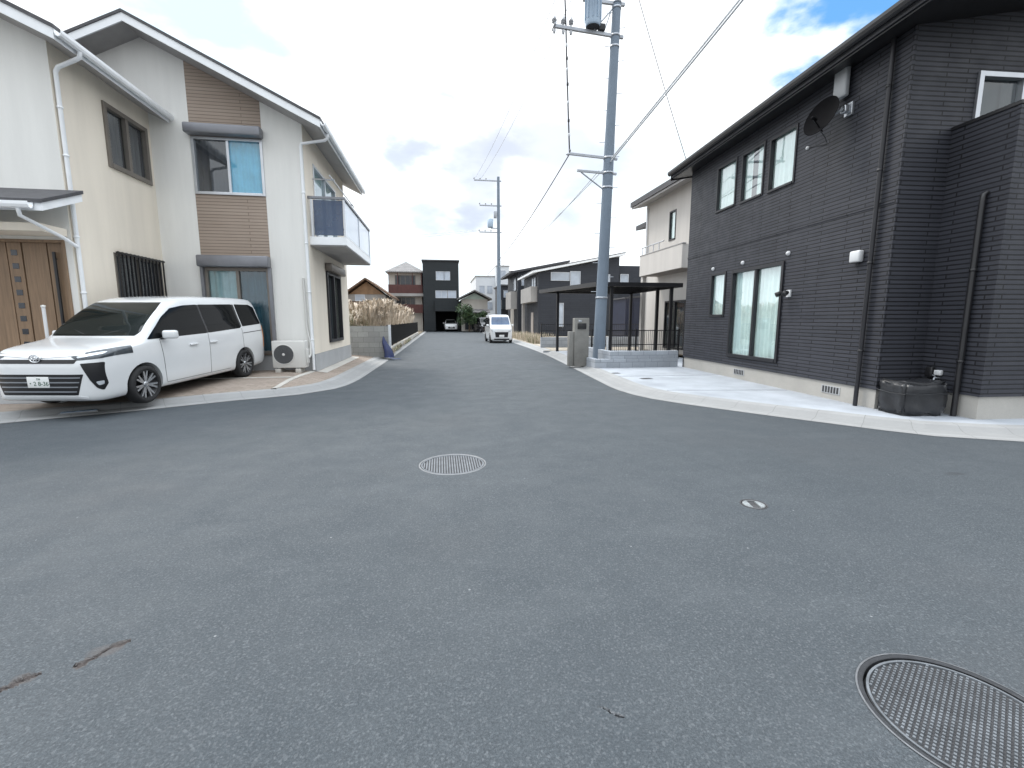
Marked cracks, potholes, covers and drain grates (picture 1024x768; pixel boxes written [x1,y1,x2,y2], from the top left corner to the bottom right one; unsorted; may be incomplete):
manhole cover [855,653,1024,768]
utility cover [739,499,768,510]
